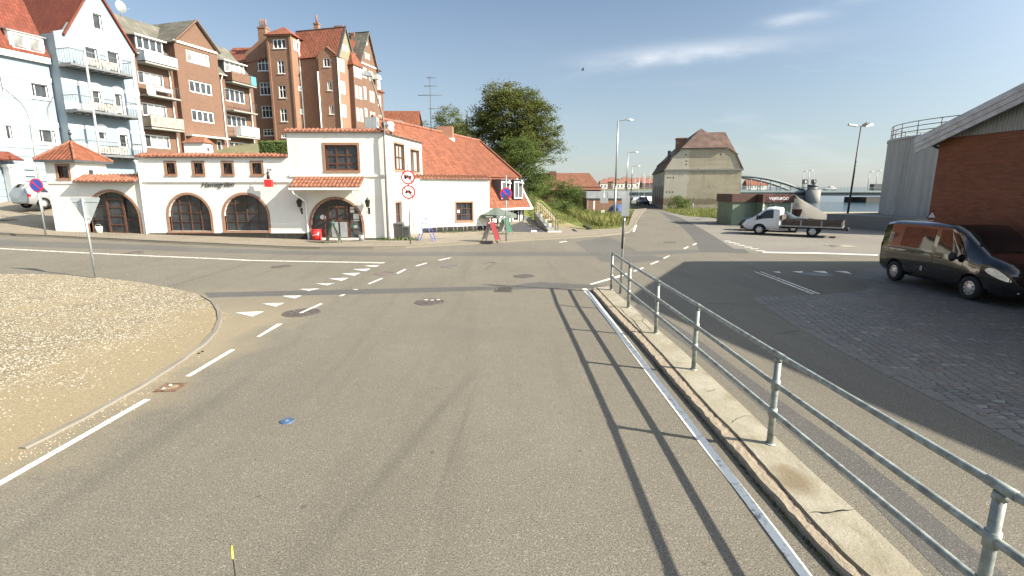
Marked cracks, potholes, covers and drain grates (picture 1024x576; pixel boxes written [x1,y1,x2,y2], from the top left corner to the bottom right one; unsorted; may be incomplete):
drain grate [153,382,188,392]
manhole cover [282,308,320,317]
